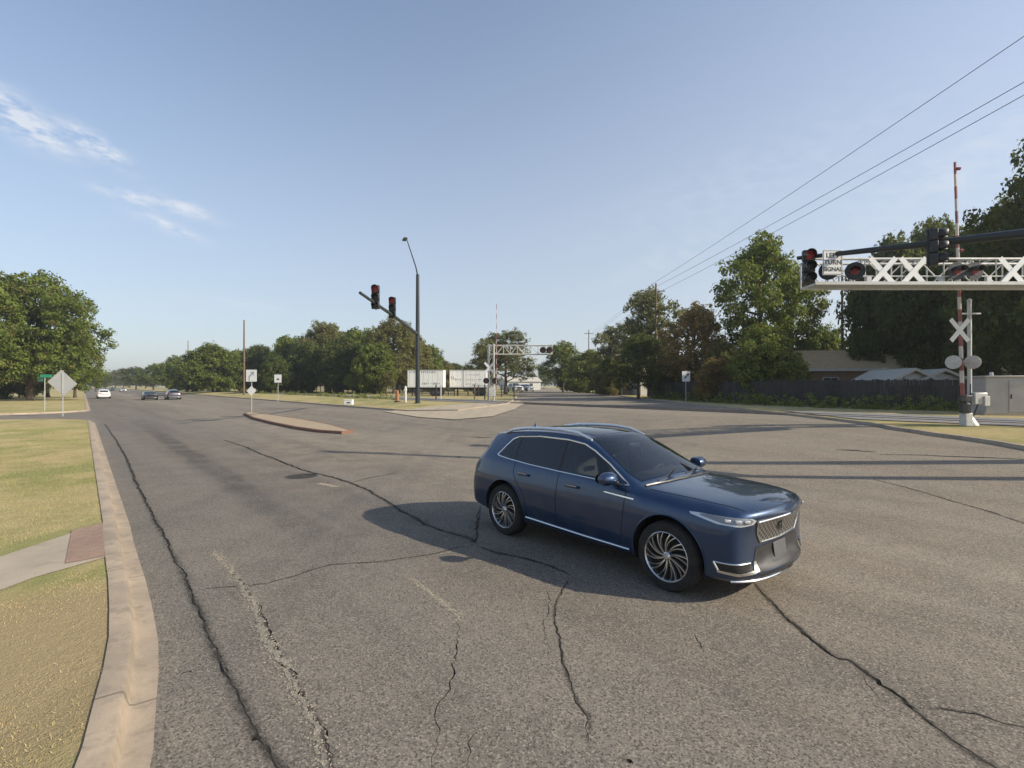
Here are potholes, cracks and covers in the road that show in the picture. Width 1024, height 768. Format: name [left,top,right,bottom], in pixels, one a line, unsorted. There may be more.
crack [105,417,591,768]
crack [874,479,1023,523]
crack [754,583,1024,768]
